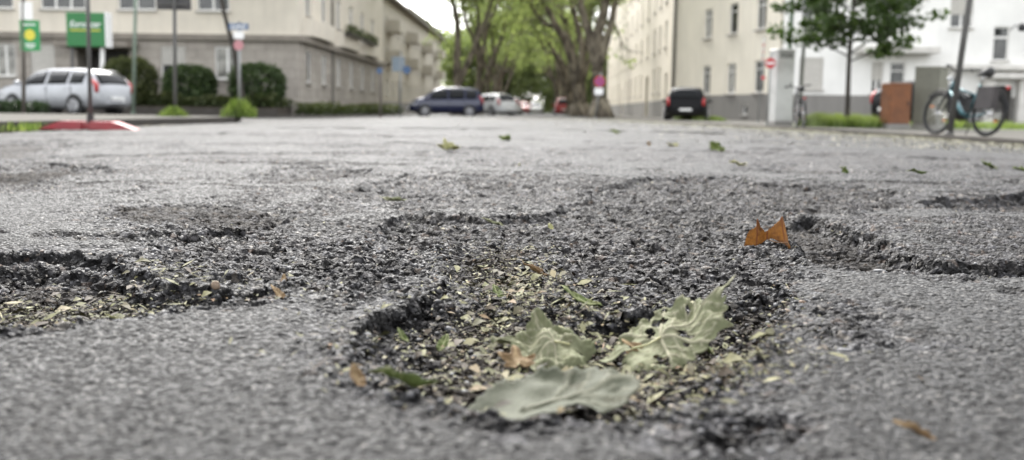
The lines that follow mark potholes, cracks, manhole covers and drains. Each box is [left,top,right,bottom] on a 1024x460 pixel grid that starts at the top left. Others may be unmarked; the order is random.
pothole [87,201,312,234]
pothole [0,249,292,338]
pothole [917,190,1024,213]
pothole [769,214,1024,279]
pothole [327,241,801,428]
